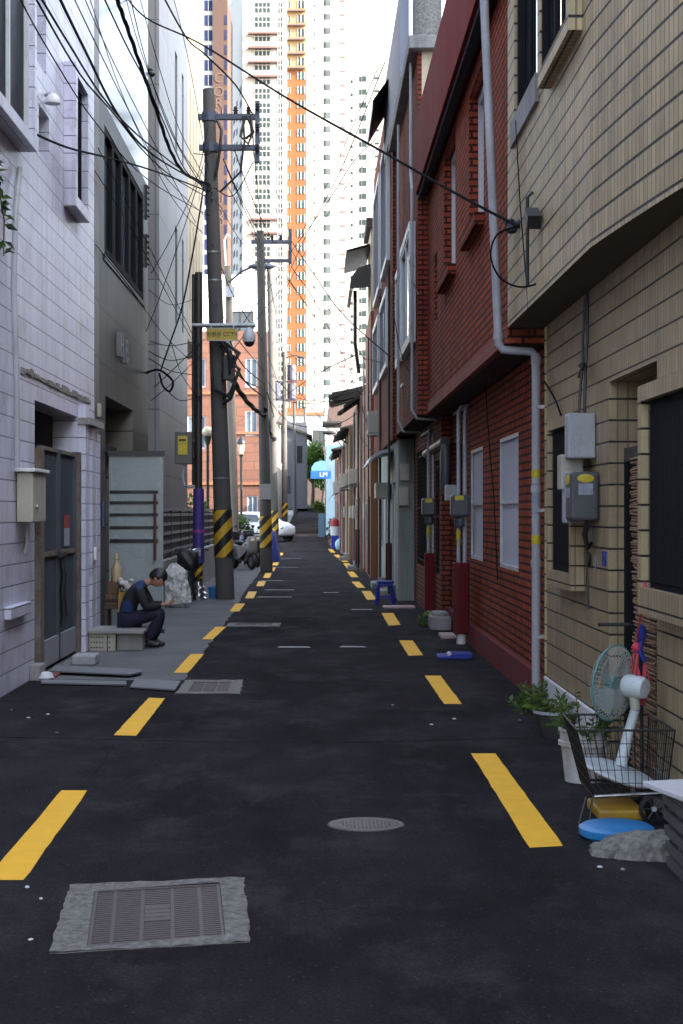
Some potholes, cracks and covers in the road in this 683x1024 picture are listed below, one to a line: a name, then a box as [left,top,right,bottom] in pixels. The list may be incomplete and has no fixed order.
manhole cover [327,817,405,832]
drain grate [175,679,243,694]
drain grate [49,877,250,954]
